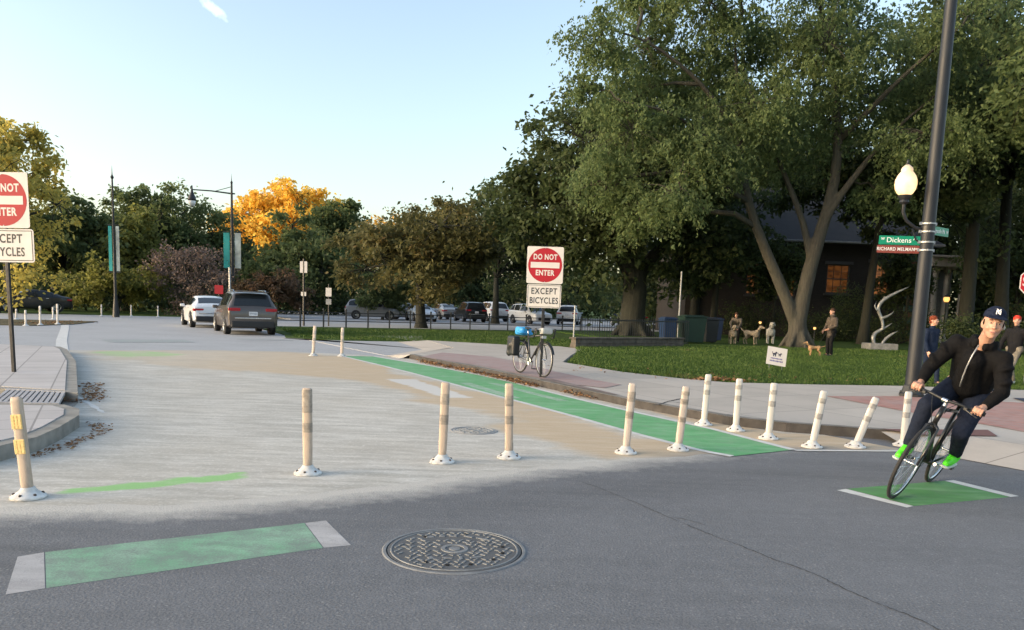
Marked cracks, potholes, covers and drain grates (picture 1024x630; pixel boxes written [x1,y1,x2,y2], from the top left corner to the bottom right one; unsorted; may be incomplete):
drain grate [0,388,65,404]
manhole cover [382,528,526,575]
manhole cover [450,426,498,435]
